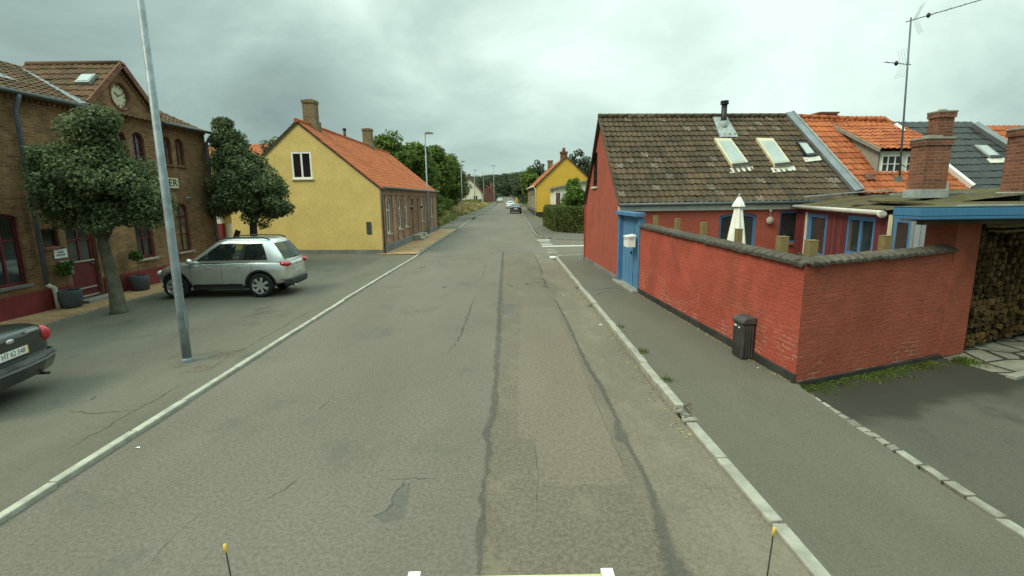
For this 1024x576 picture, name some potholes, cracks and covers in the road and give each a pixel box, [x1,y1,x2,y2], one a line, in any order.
crack [71,313,306,448]
